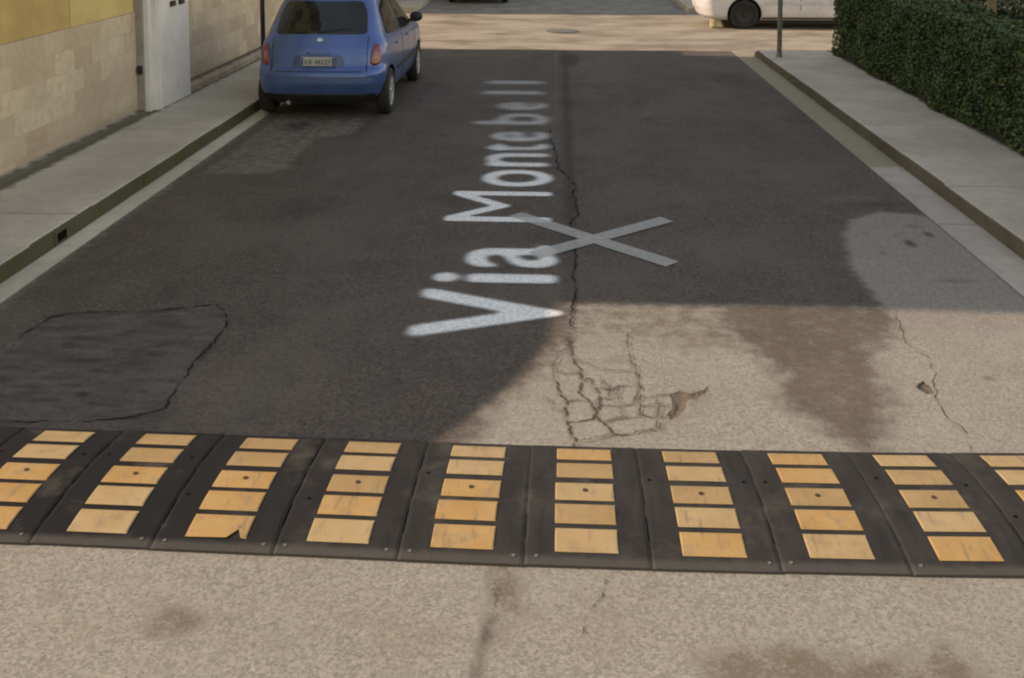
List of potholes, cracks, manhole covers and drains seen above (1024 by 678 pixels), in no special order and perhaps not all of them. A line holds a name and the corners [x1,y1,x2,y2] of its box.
pothole [916,381,934,394]
crack [547,130,669,446]
crack [896,318,971,448]
